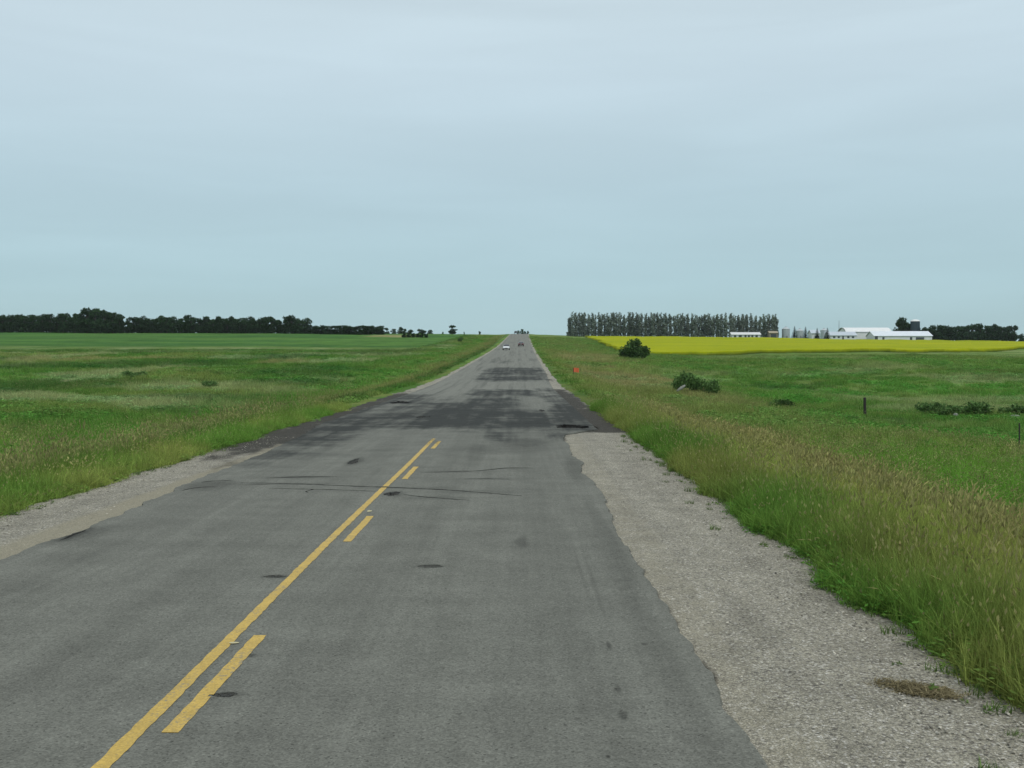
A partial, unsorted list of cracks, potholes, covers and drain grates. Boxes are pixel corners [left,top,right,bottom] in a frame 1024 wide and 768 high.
crack [182,468,519,500]
